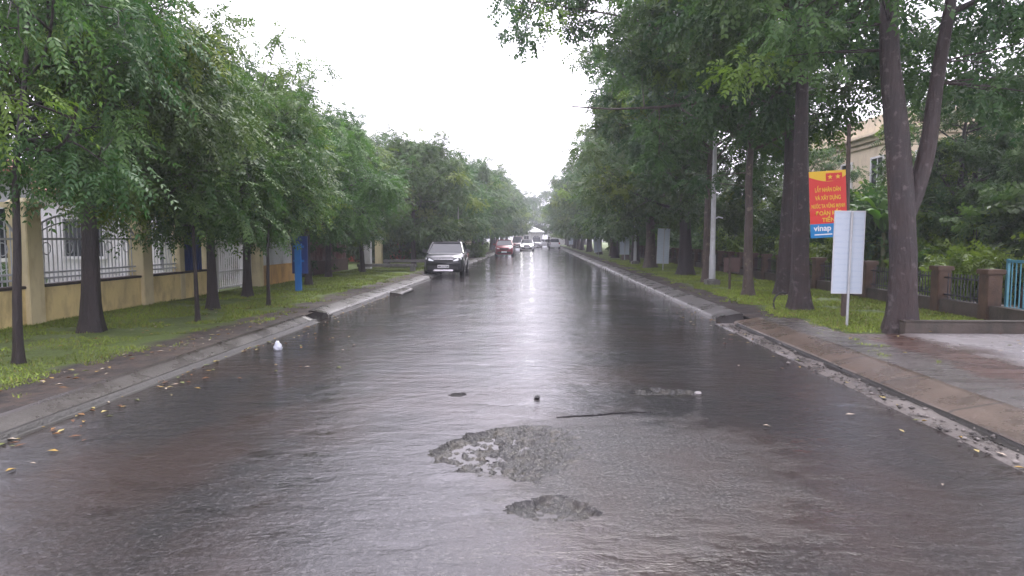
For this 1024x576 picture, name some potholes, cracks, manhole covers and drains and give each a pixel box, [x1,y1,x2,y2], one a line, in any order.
pothole [503,495,603,522]
crack [557,411,654,419]
pothole [629,387,700,397]
pothole [427,424,595,486]
